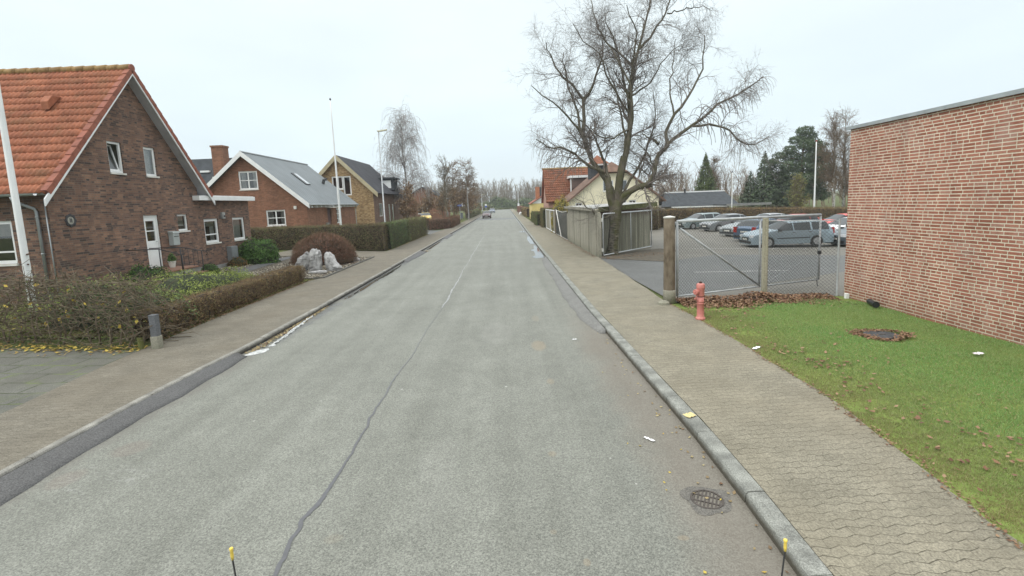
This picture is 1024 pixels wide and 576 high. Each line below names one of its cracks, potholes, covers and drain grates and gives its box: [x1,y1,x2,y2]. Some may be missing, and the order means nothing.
drain grate [679,486,732,516]
